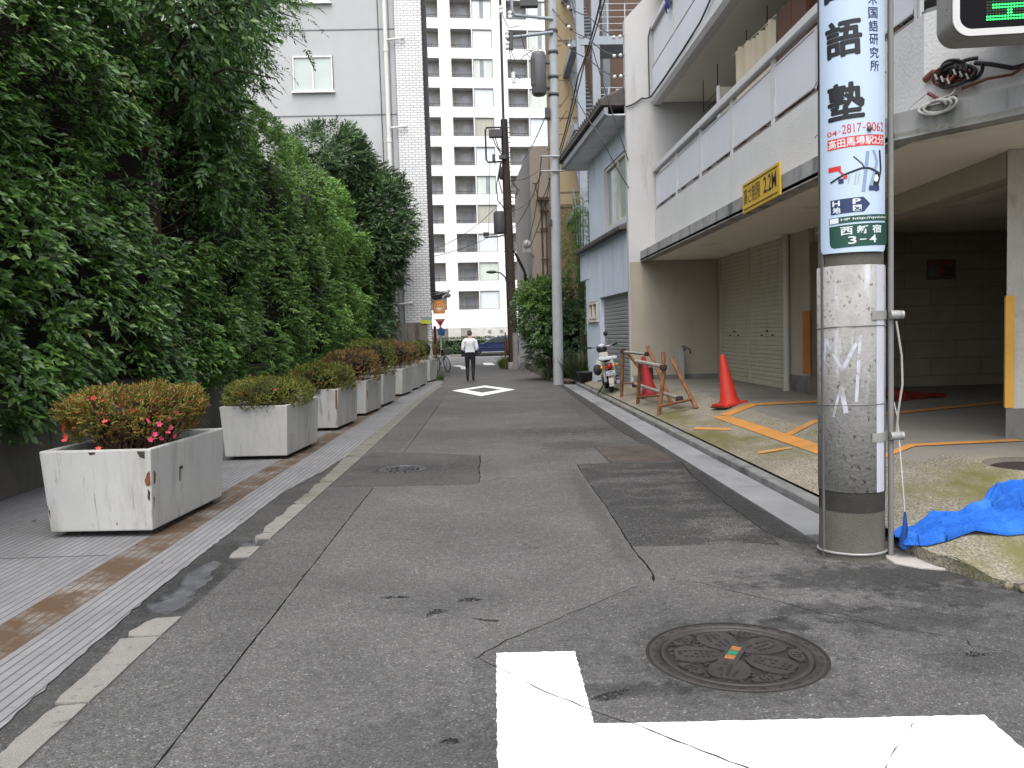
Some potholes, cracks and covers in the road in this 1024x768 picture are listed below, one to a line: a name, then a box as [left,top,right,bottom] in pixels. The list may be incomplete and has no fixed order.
crack [468,465,747,768]
pothole [588,688,629,701]
manhole cover [645,622,831,693]
manhole cover [377,465,428,473]
